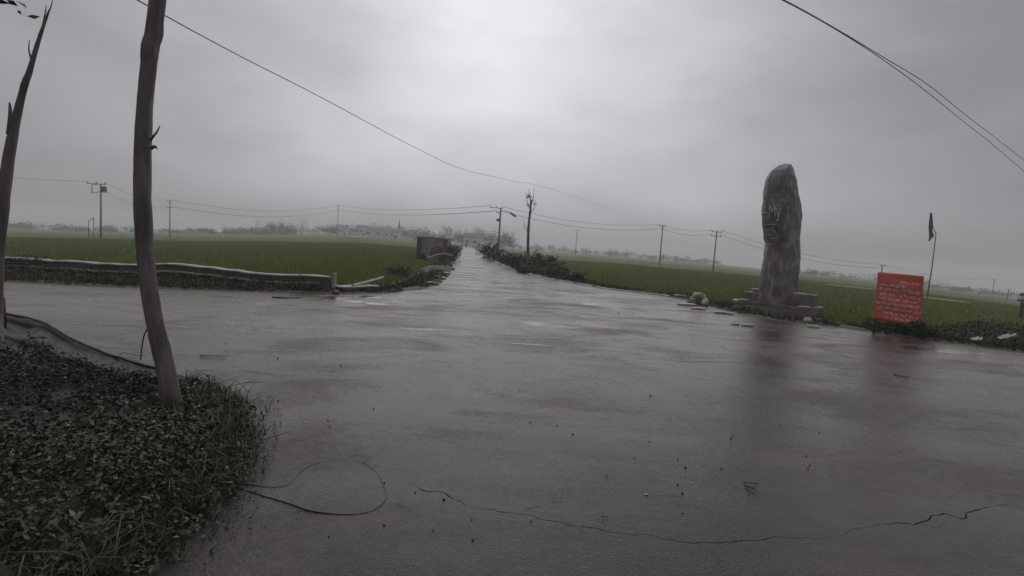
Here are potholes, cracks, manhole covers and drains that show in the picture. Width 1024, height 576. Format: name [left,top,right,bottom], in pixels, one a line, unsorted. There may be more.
crack [845,502,1020,534]
crack [418,487,827,544]
